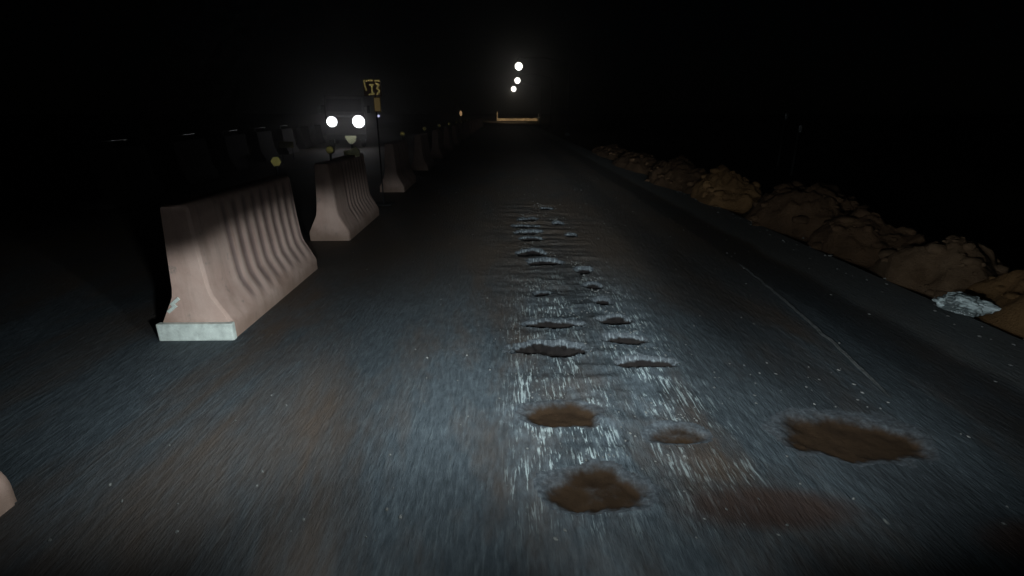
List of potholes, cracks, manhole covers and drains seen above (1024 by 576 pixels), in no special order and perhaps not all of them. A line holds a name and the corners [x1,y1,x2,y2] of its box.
pothole [533,458,662,516]
pothole [515,399,605,429]
pothole [519,318,587,329]
pothole [502,338,596,358]
pothole [526,257,565,266]
pothole [640,420,714,445]
pothole [760,408,941,468]
pothole [593,313,635,325]
pothole [612,353,679,368]
pothole [597,332,650,346]
pothole [515,248,548,257]
